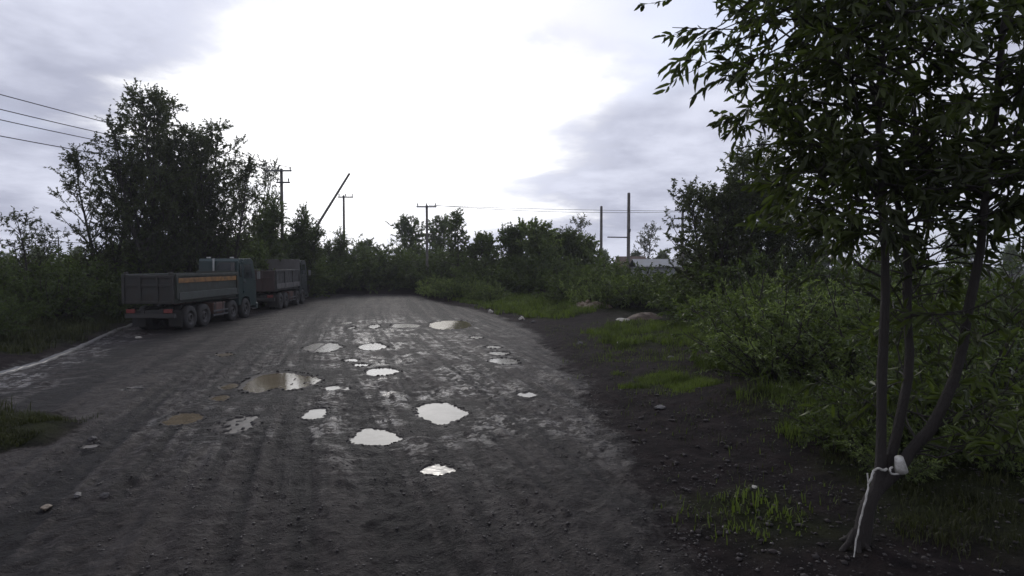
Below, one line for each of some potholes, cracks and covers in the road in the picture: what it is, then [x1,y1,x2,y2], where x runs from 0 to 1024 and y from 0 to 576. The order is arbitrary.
pothole [158,411,207,427]
pothole [428,320,475,330]
pothole [302,342,347,353]
pothole [416,461,461,476]
pothole [297,406,332,420]
pothole [515,390,539,398]
pothole [237,369,325,394]
pothole [207,413,263,437]
pothole [356,342,389,351]
pothole [208,393,234,401]
pothole [486,357,522,365]
pothole [364,366,403,376]
